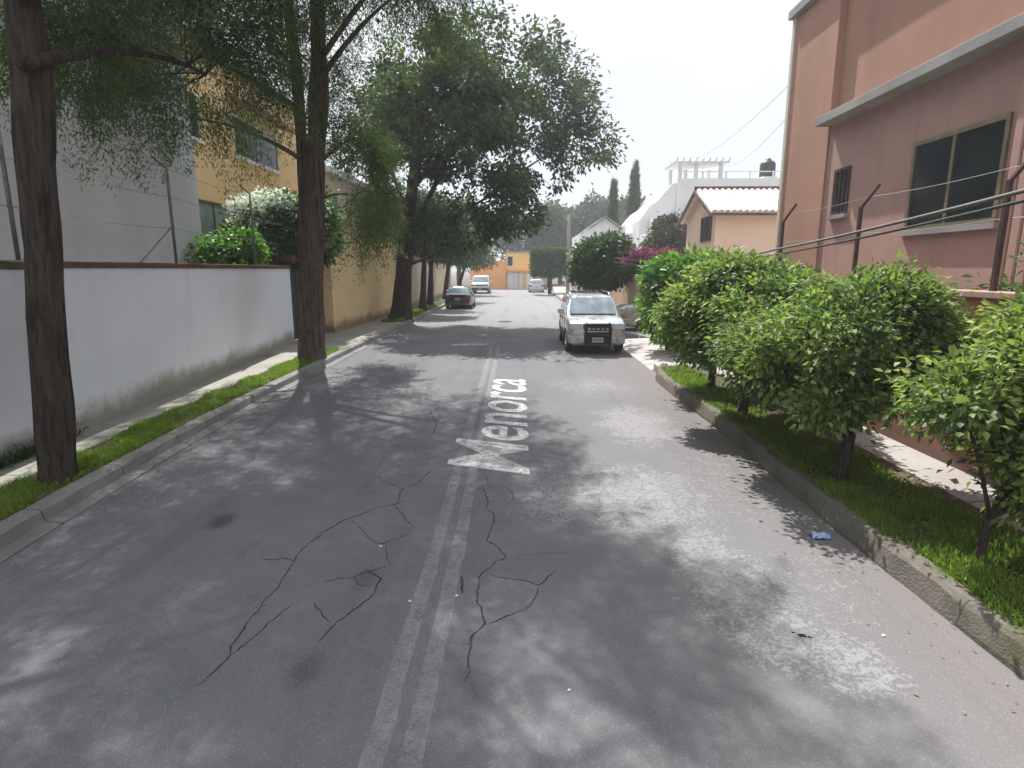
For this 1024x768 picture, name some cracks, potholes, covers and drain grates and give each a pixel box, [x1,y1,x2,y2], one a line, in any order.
crack [460,479,556,682]
crack [198,471,431,686]
